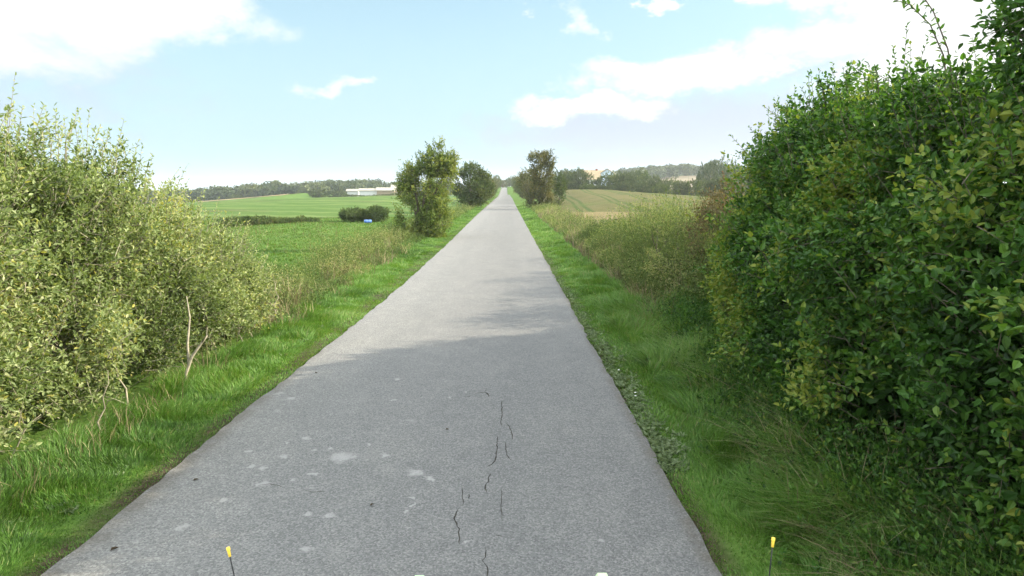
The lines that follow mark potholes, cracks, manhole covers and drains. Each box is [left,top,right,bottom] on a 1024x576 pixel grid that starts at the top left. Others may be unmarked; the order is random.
crack [453,390,513,545]
